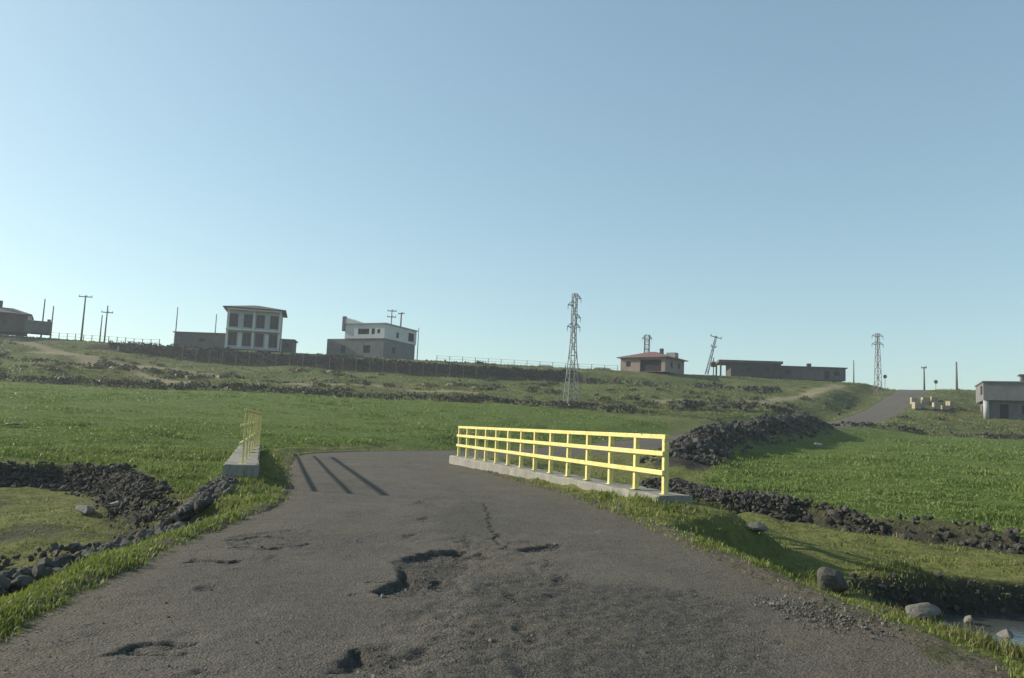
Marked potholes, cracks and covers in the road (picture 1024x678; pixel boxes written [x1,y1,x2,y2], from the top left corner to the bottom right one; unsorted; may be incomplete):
pothole [208,528,325,548]
pothole [508,542,570,554]
pothole [167,557,252,567]
crack [481,503,512,552]
pothole [357,548,483,602]
pothole [303,640,447,678]
pothole [88,637,215,664]
